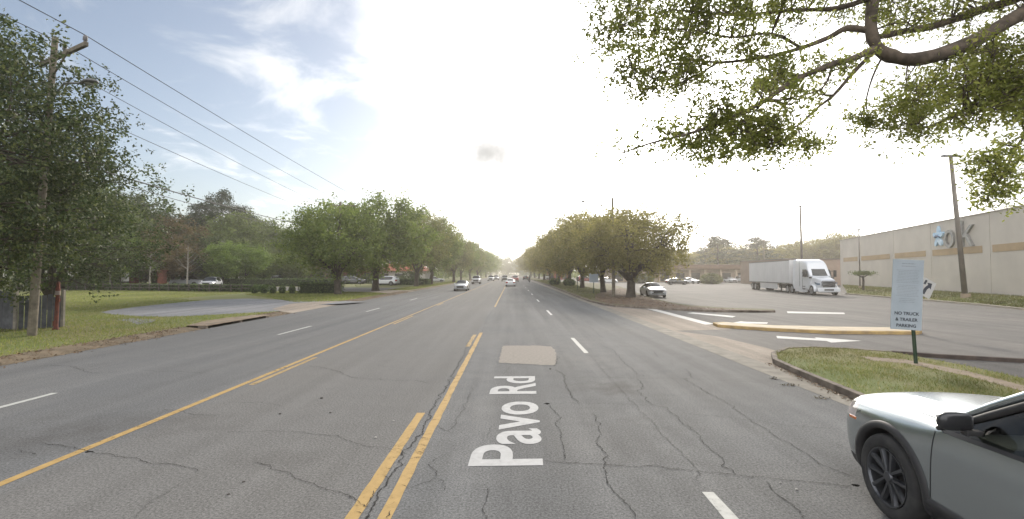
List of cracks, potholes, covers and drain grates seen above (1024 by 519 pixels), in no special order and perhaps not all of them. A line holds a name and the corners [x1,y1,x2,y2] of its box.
crack [249,387,492,517]
crack [497,329,865,519]
crack [21,444,199,517]
